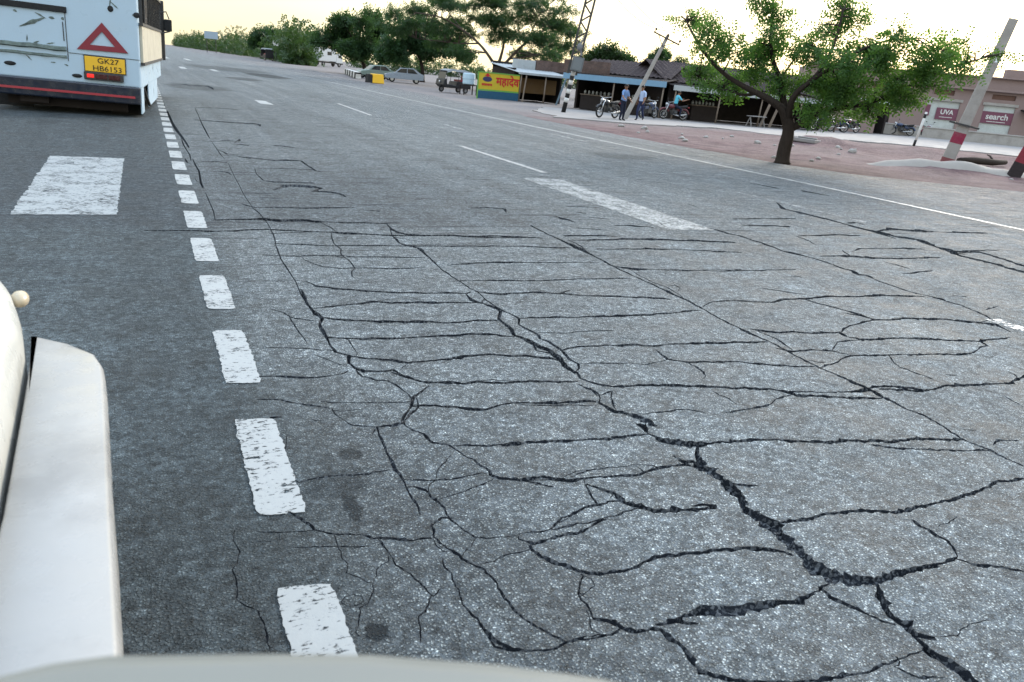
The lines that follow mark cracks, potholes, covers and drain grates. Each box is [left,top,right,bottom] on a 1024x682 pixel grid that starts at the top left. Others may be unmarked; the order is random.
crack [143,93,1024,682]
